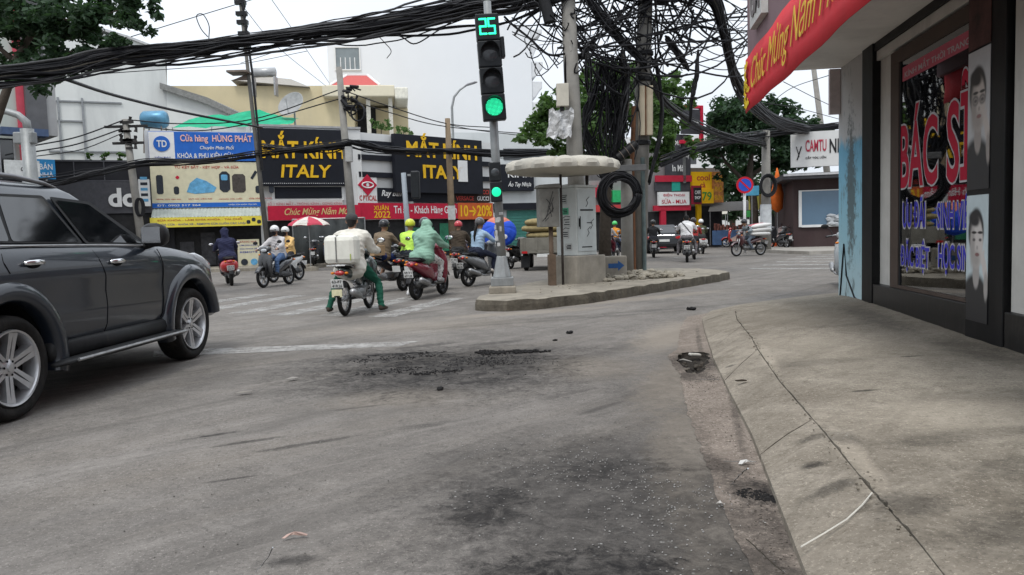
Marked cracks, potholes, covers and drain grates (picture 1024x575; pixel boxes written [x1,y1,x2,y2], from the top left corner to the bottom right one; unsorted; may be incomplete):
pothole [673,352,711,374]
